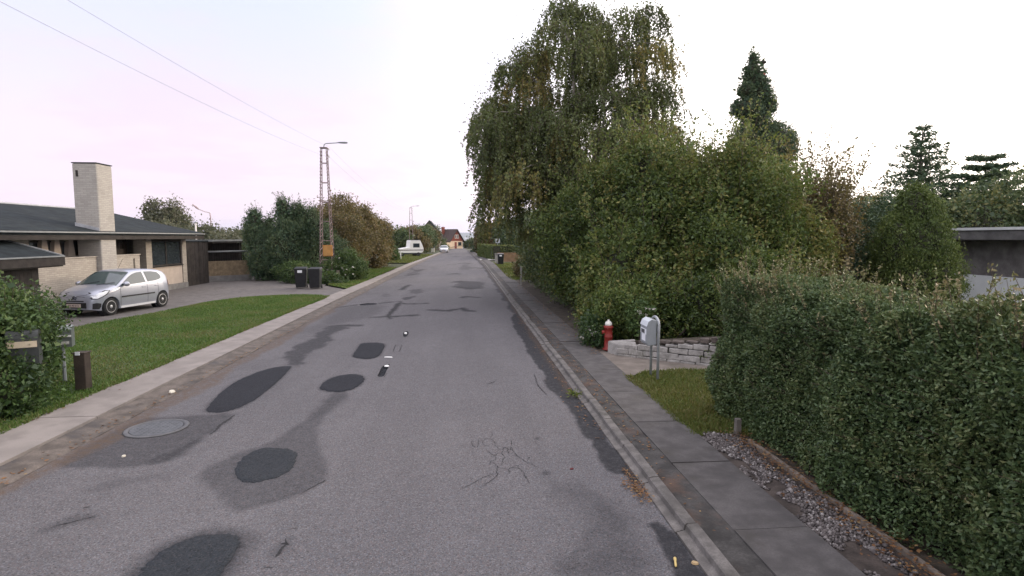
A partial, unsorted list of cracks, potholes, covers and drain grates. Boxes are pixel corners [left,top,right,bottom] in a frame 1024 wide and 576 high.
crack [470,432,537,487]
manhole cover [122,419,190,438]
